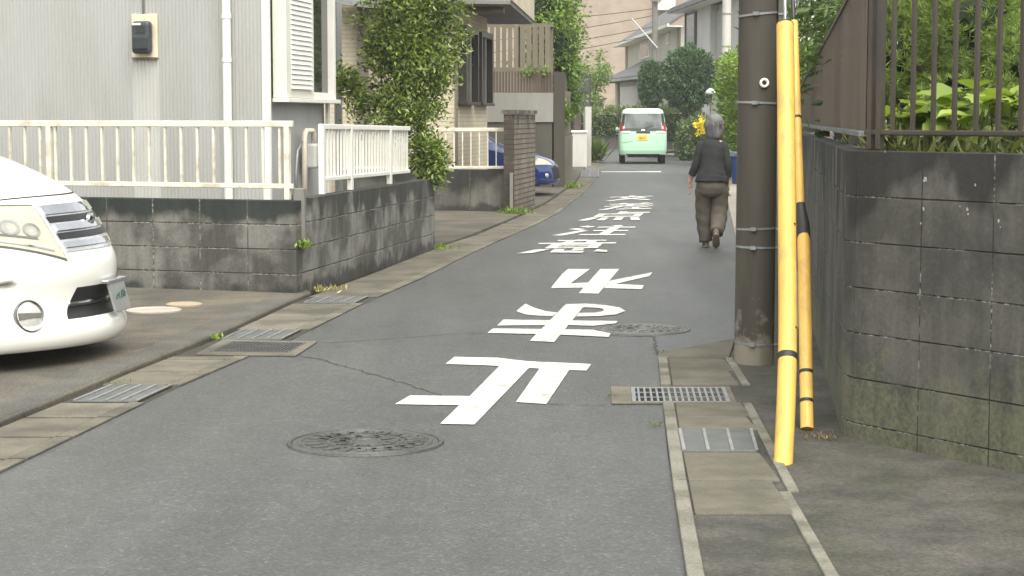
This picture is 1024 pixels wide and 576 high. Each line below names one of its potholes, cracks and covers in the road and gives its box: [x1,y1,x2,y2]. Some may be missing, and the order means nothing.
drain grate [610,386,736,404]
manhole cover [286,428,444,457]
drain grate [195,339,317,357]
manhole cover [597,323,690,335]
crack [299,333,473,395]
